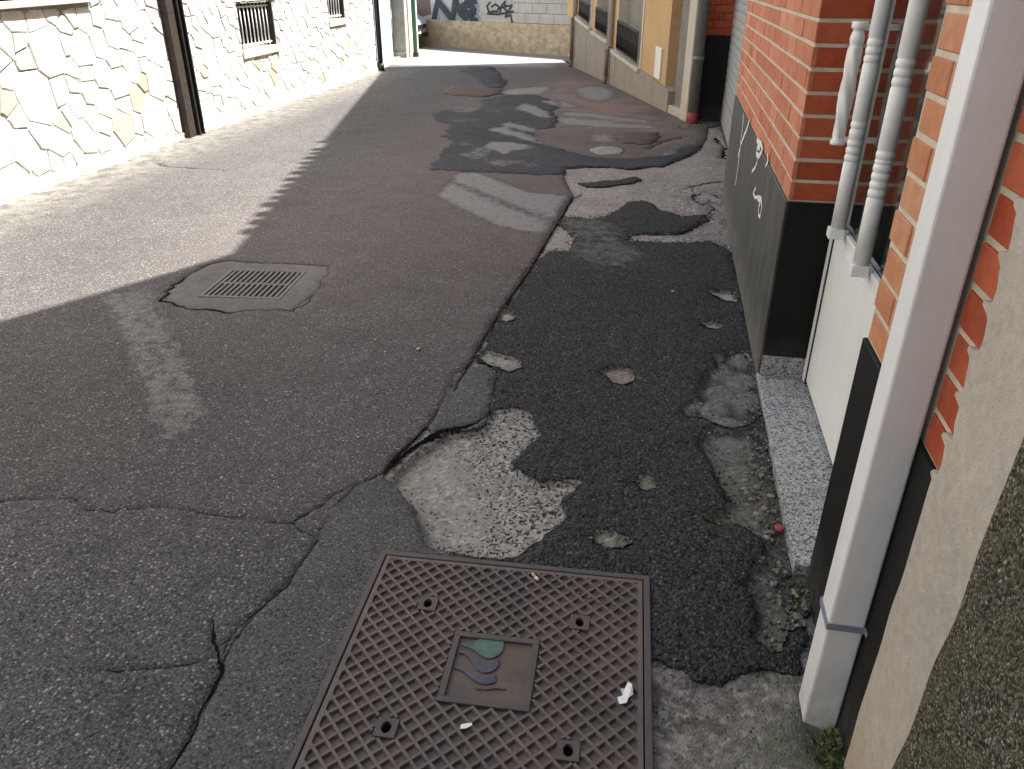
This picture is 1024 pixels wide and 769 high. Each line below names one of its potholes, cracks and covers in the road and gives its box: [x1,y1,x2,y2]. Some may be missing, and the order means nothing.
drain grate [198,269,307,299]
crack [455,194,582,390]
manhole cover [285,550,653,769]
crack [688,182,721,217]
pothole [698,427,809,653]
crack [713,137,727,159]
pothole [390,408,582,562]
crack [0,411,489,769]
pothole [681,349,762,428]
